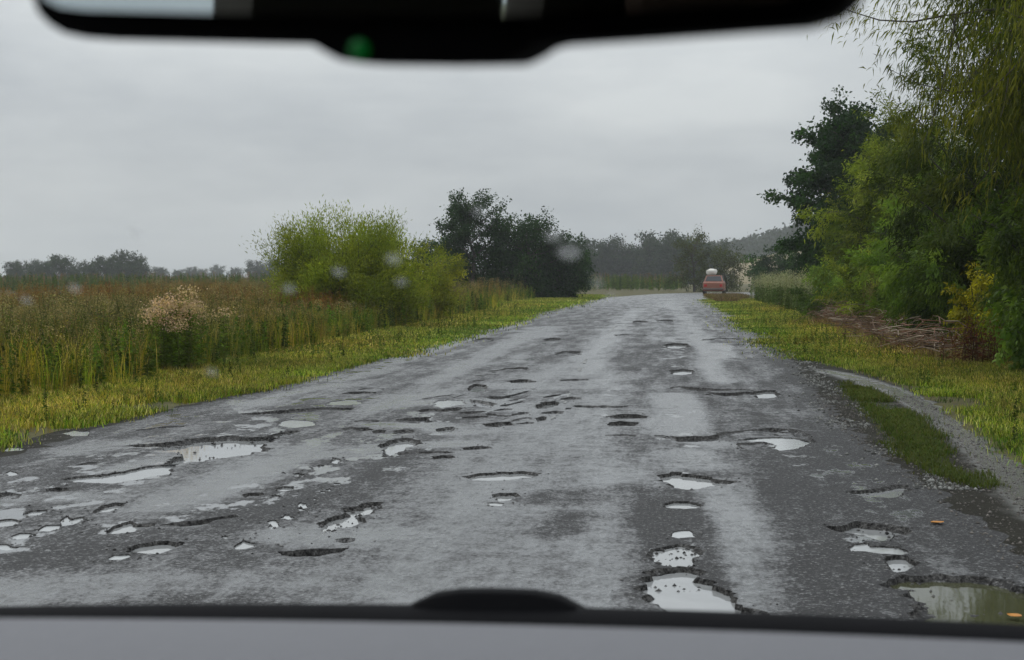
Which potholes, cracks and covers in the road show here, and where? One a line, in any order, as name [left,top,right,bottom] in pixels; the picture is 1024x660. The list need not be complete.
pothole [739,437,812,451]
pothole [377,437,423,457]
pothole [63,464,177,484]
pothole [662,501,704,509]
pothole [127,541,181,554]
pothole [646,544,705,567]
pothole [462,471,542,481]
pothole [633,566,767,613]
pothole [316,502,384,533]
pothole [104,520,157,534]
pothole [826,521,913,541]
pothole [878,574,1024,625]
